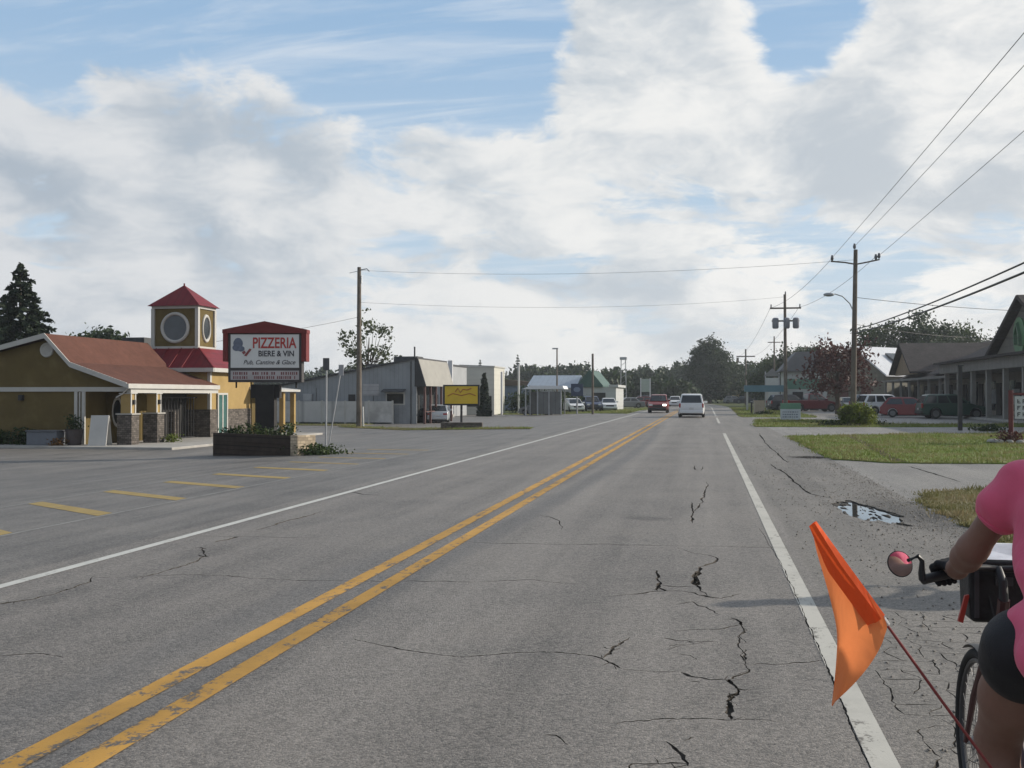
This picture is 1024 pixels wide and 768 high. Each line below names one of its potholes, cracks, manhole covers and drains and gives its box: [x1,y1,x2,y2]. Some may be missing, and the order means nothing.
crack [480,530,871,768]
crack [355,639,654,672]
crack [875,611,988,768]
crack [690,466,709,523]
pothole [831,500,904,524]
crack [2,512,573,604]
